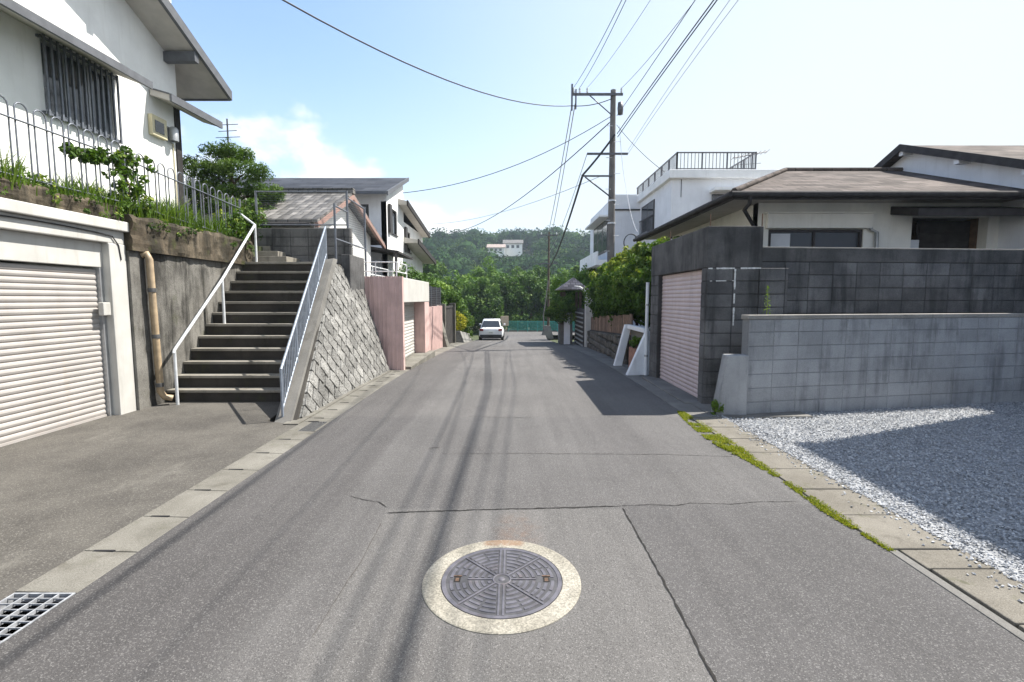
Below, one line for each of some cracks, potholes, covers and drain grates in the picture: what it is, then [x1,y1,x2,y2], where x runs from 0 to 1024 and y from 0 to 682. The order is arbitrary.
crack [312,496,786,682]
drain grate [0,593,76,645]
manhole cover [422,540,581,635]
